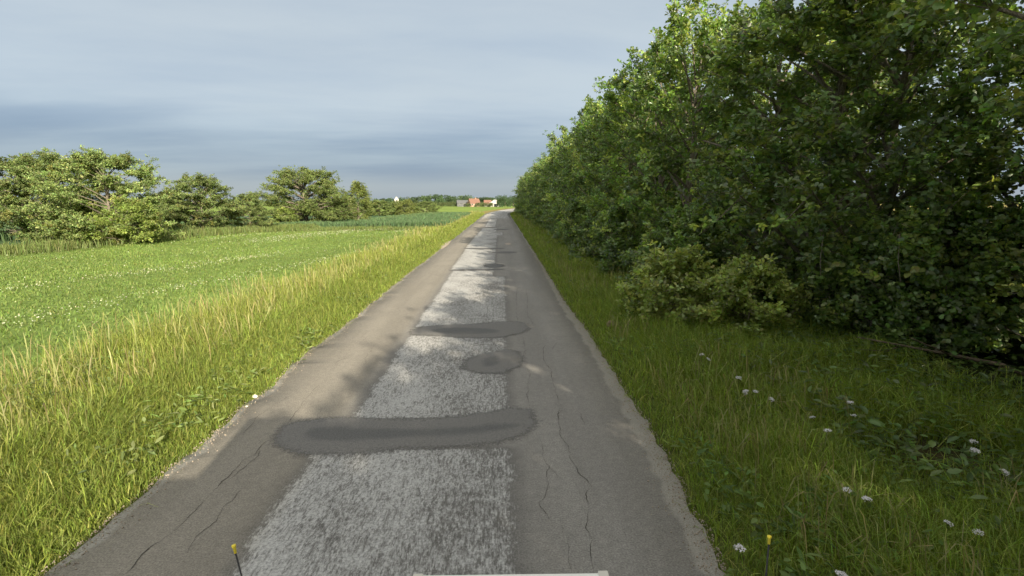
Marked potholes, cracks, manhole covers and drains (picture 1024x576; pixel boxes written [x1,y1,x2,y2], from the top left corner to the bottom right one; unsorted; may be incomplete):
crack [525,342,593,571]
crack [123,385,321,575]
